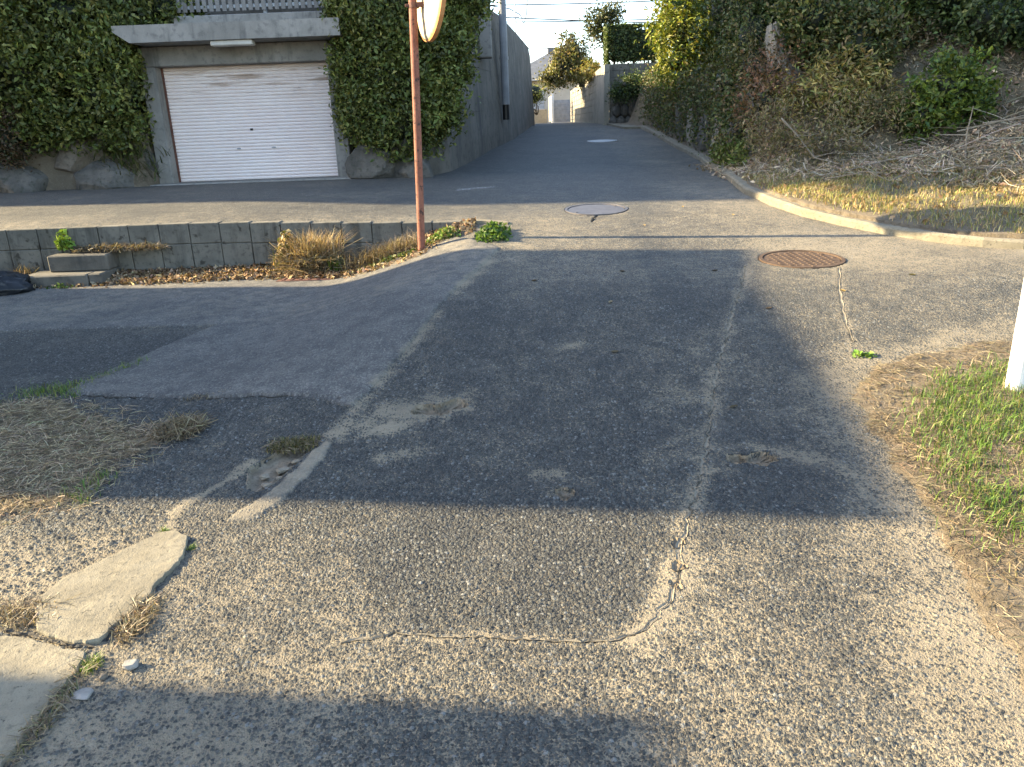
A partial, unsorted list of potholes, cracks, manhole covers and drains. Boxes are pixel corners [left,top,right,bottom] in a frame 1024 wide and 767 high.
pothole [555,487,576,501]
manhole cover [759,250,846,269]
manhole cover [565,203,628,216]
pothole [726,452,779,466]
pothole [410,399,469,416]
crack [837,267,854,342]
pothole [245,436,322,492]
